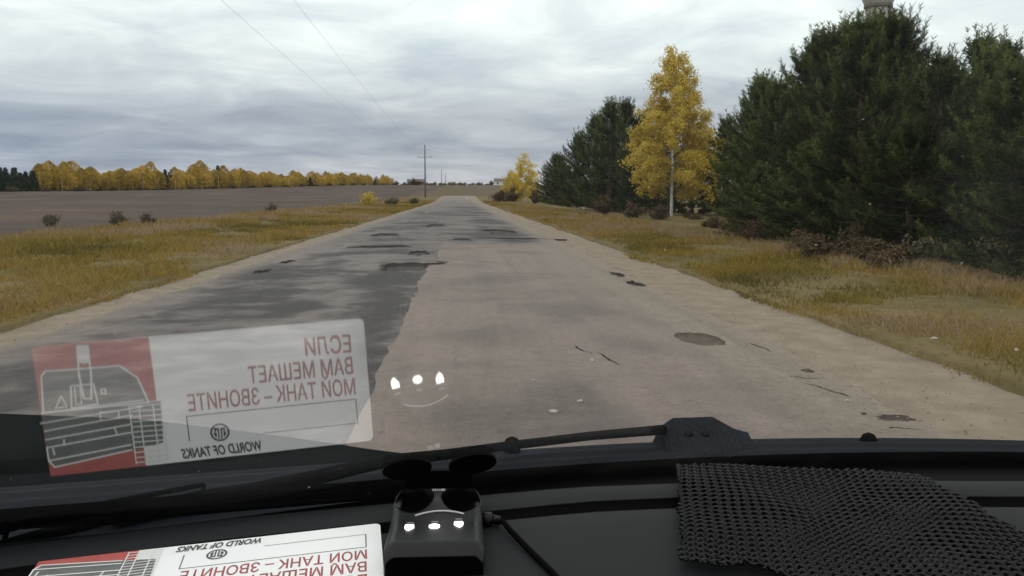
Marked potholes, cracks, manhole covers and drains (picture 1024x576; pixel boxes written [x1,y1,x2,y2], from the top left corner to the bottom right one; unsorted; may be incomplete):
pothole [379,262,445,272]
pothole [875,414,917,422]
crack [575,346,619,365]
crack [790,376,850,397]
pothole [674,332,726,346]
